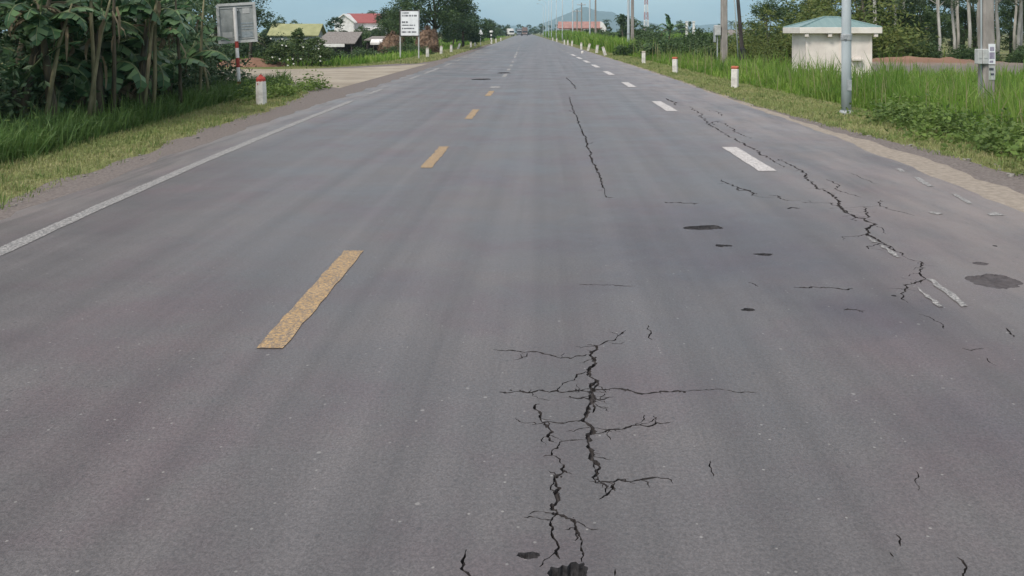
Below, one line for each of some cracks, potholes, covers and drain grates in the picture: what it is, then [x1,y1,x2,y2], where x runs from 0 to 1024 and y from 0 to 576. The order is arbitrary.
crack [666,98,938,302]
crack [493,325,754,567]
crack [566,77,613,198]
pothole [547,562,588,576]
